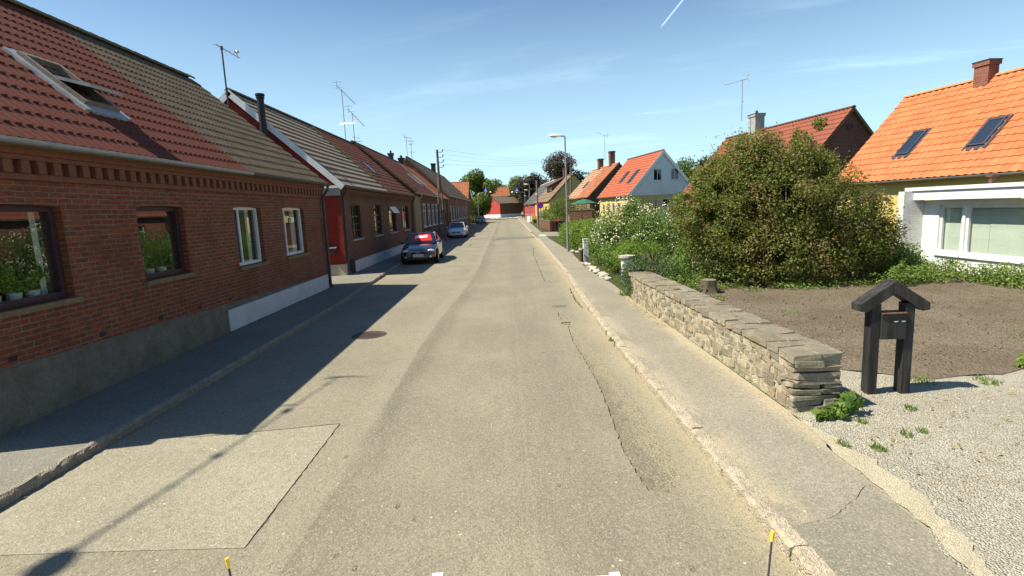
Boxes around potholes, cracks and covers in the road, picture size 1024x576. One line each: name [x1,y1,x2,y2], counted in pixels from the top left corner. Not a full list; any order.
crack [533,252,649,491]
